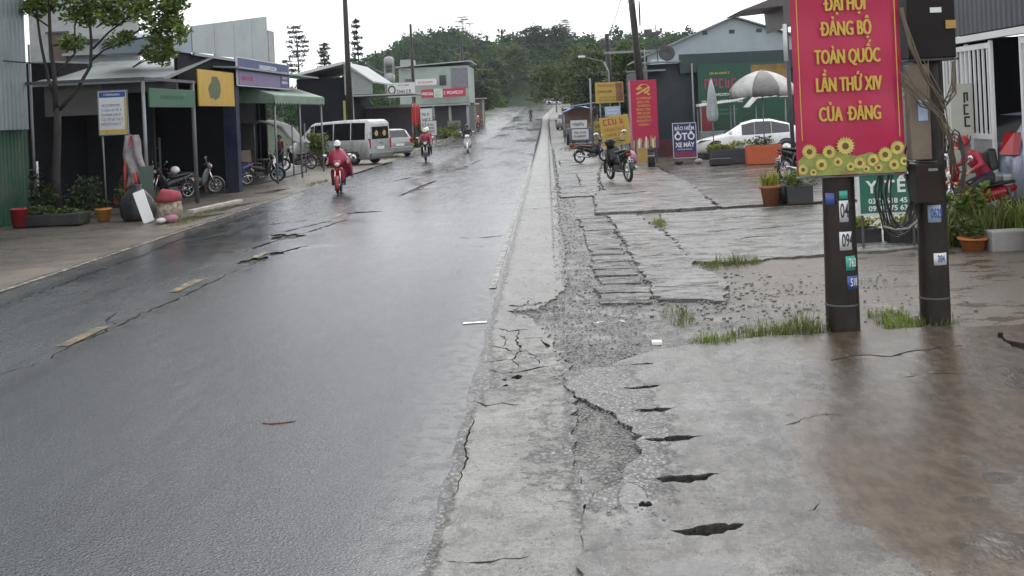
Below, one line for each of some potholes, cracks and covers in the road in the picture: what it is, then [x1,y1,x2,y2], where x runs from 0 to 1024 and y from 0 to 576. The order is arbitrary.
crack [0,262,256,375]
crack [456,401,529,564]
crack [482,329,557,374]
crack [0,211,349,306]
